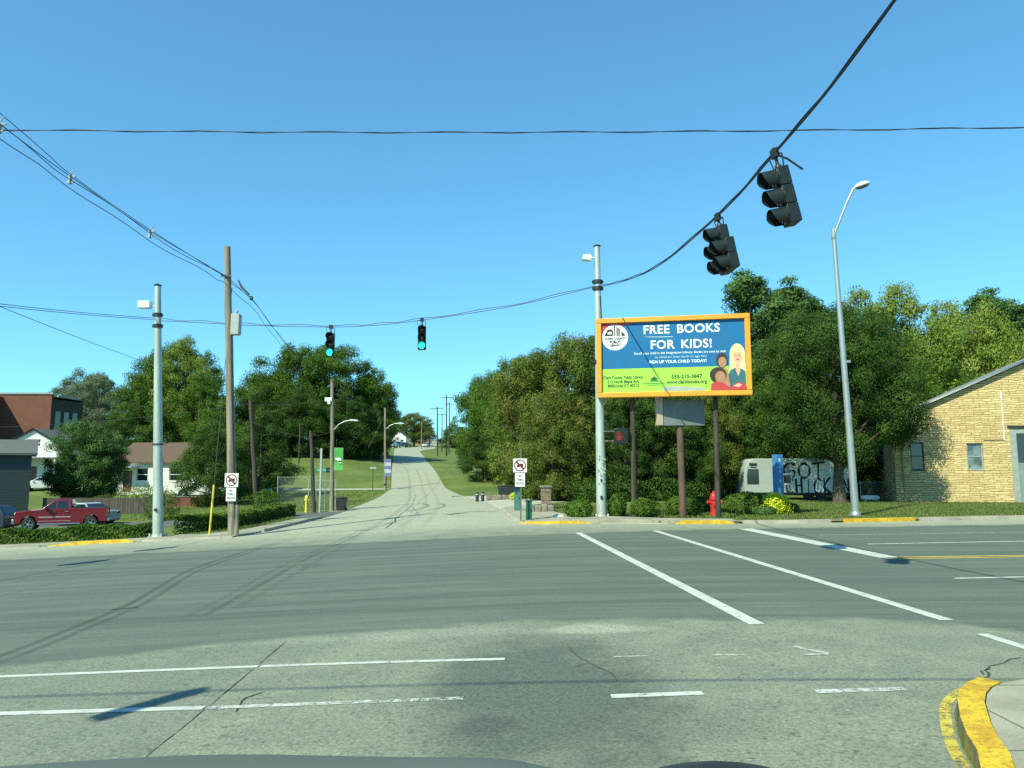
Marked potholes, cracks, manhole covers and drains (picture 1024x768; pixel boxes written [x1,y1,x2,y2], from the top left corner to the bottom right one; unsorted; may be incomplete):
crack [980,658,1016,678]
